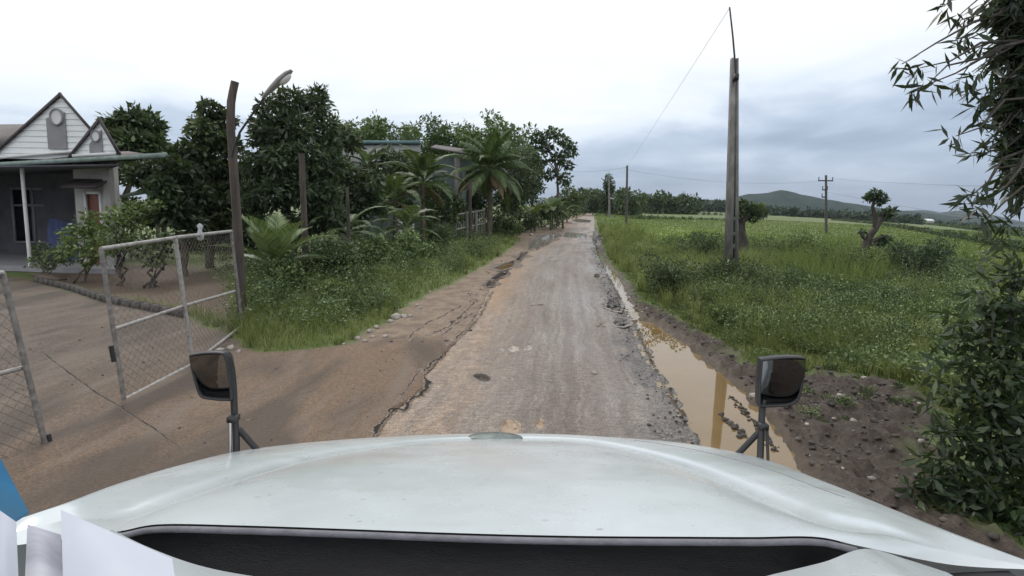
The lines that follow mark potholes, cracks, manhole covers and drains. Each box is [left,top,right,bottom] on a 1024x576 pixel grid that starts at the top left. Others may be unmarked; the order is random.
crack [370,291,494,437]
pothole [511,251,533,262]
pothole [469,373,494,383]
pothole [528,232,560,250]
pothole [481,280,502,288]
pothole [489,260,522,271]
pothole [489,270,511,281]
